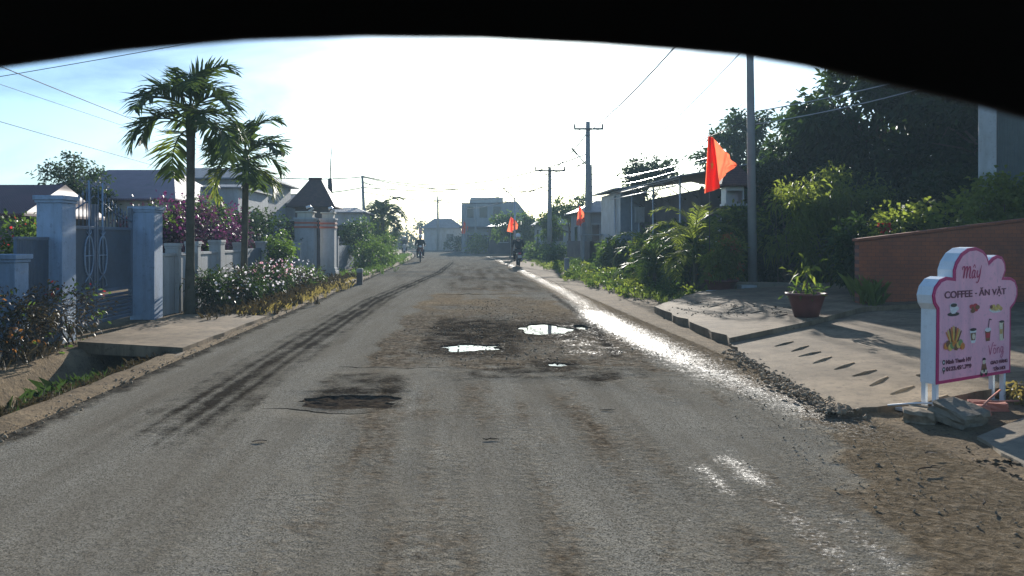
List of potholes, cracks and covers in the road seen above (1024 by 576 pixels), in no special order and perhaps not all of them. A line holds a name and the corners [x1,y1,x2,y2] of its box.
pothole [298,395,401,410]
pothole [516,323,576,335]
pothole [441,343,502,352]
